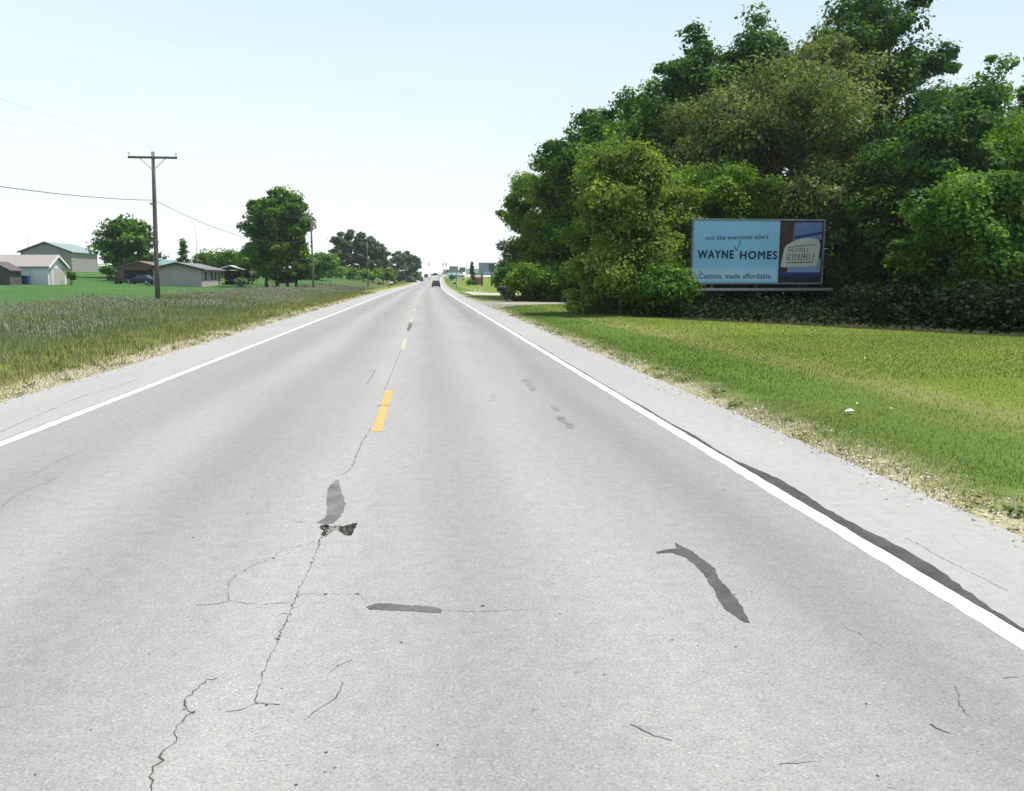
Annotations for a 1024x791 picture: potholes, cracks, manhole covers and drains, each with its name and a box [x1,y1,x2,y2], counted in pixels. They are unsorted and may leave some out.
crack [149,678,217,791]
crack [205,535,363,712]
pothole [320,523,357,537]
